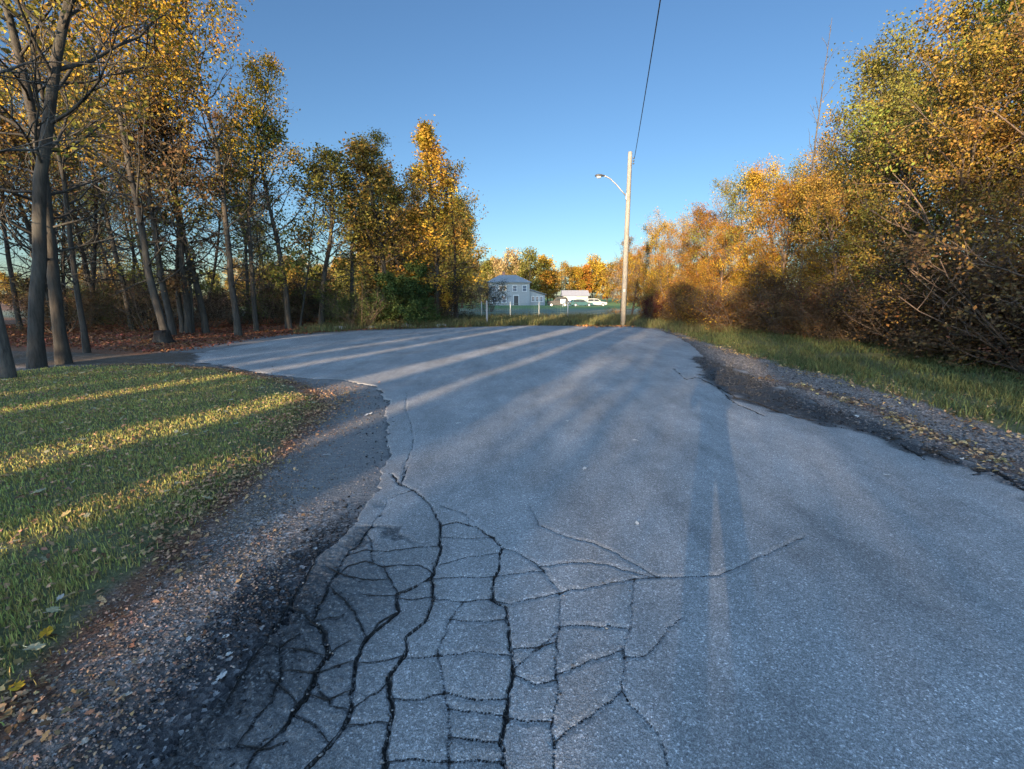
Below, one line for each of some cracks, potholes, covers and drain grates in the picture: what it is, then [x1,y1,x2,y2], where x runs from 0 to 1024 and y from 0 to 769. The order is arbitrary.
crack [677,372,816,421]
